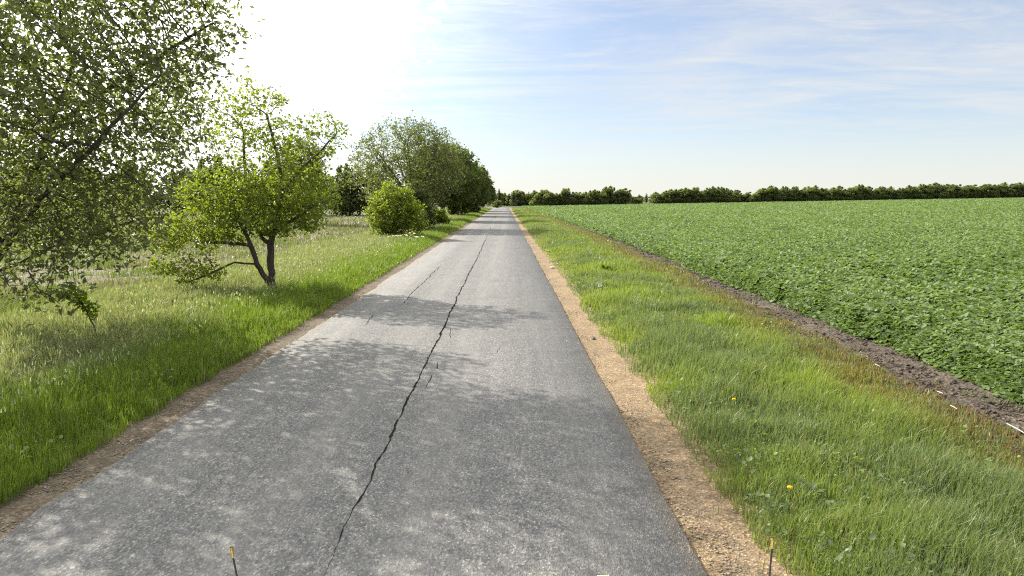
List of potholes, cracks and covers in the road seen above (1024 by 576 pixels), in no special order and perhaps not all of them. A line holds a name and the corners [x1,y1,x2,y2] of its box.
crack [324,227,491,576]
